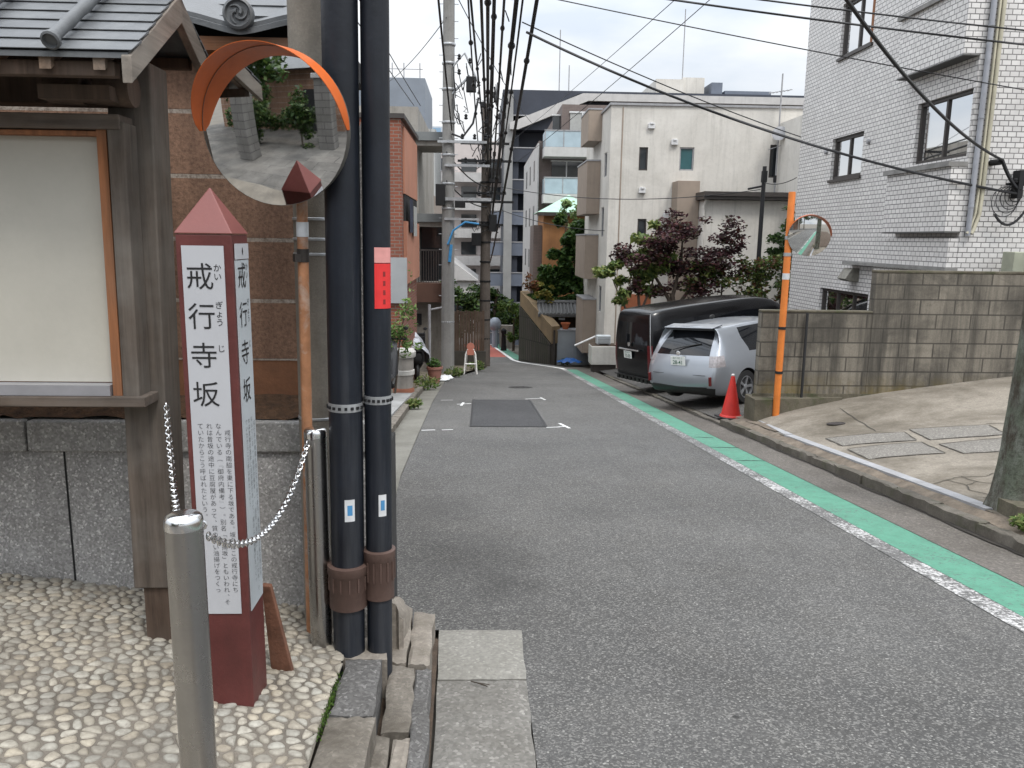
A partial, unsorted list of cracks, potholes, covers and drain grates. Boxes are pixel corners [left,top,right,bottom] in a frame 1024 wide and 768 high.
crack [934,473,993,498]
